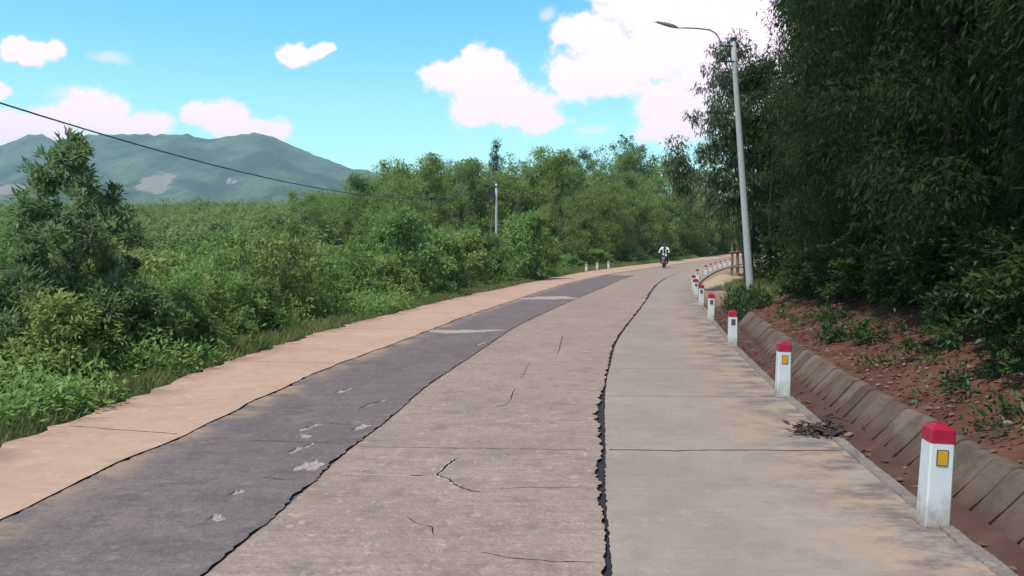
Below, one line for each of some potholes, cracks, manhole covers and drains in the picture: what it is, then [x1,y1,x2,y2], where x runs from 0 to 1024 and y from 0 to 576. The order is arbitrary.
crack [498,362,530,406]
crack [434,458,477,492]
pothole [292,459,324,471]
crack [482,552,578,562]
